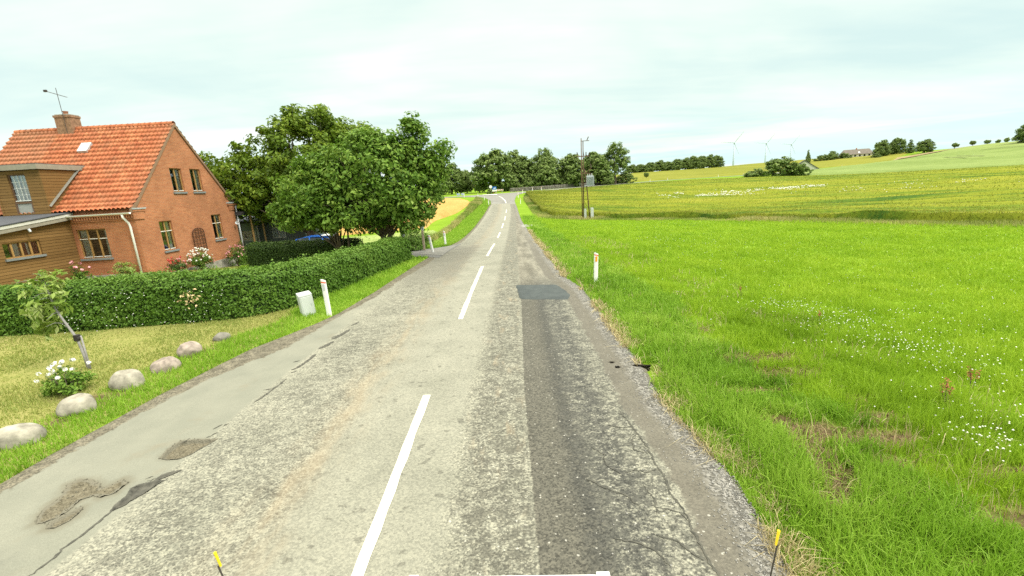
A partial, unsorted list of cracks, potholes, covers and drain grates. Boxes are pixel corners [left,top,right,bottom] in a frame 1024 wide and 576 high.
pothole [46,506,83,529]
crack [586,410,719,576]
pothole [35,478,129,524]
pothole [159,438,218,460]
